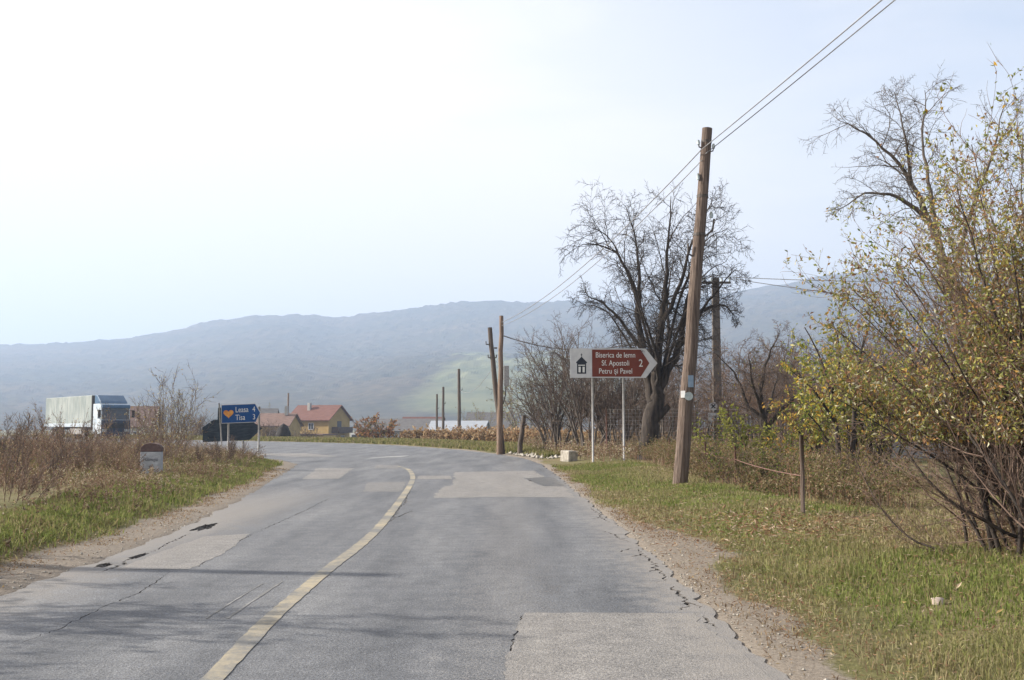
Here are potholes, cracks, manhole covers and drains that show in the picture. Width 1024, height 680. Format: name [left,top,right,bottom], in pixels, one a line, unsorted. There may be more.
crack [18,499,328,644]
crack [592,509,717,628]
